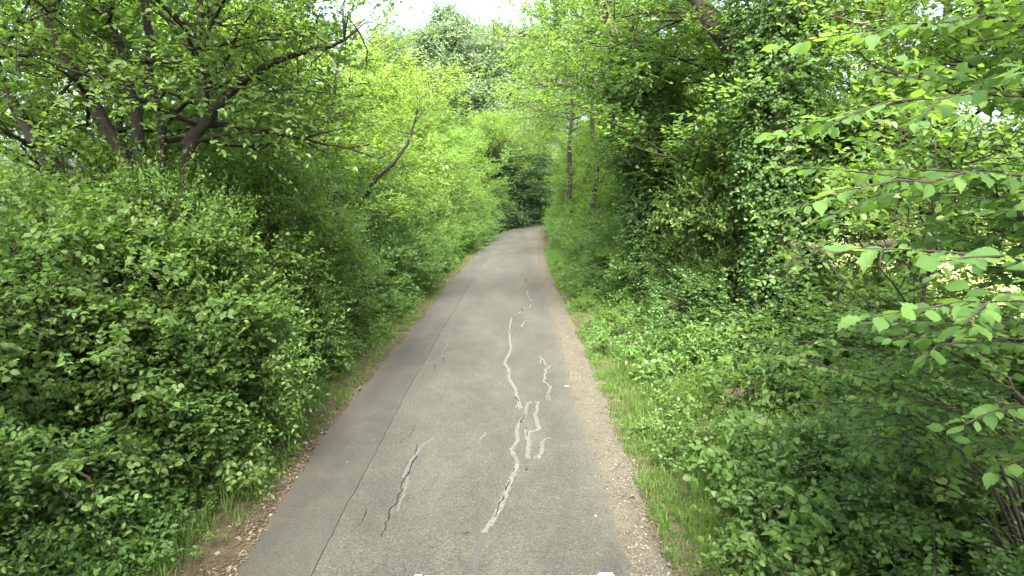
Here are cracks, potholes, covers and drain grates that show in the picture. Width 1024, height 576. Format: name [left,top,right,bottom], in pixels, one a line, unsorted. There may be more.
crack [362,427,435,538]
